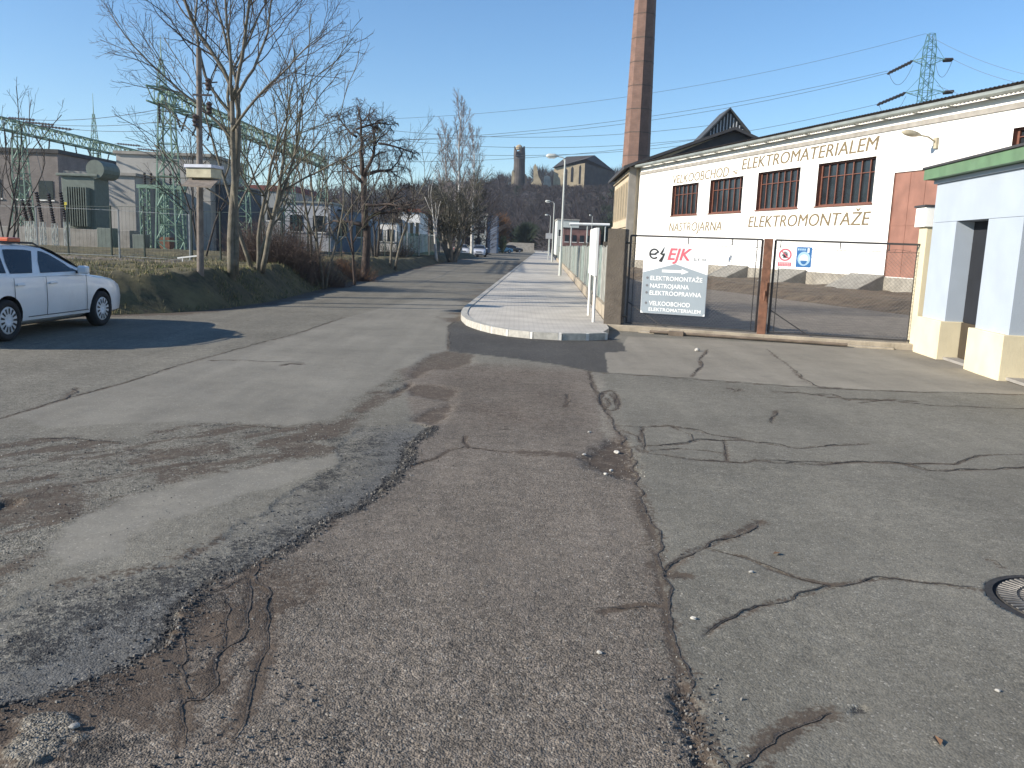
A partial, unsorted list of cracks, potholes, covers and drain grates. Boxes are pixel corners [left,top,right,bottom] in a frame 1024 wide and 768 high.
crack [177,561,271,744]
crack [736,712,831,768]
crack [600,390,1024,471]
crack [767,349,1023,409]
crack [661,522,979,634]
